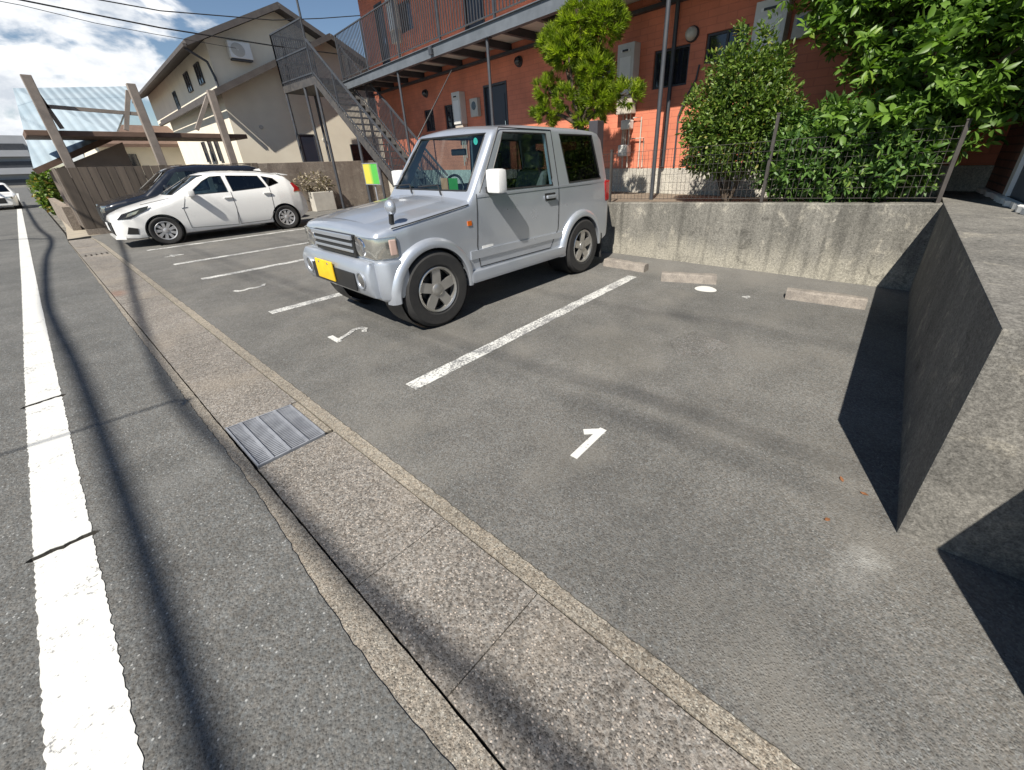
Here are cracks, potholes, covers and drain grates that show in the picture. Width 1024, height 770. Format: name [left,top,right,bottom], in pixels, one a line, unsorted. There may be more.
drain grate [225,404,326,468]
crack [24,530,101,564]
crack [21,394,66,409]
